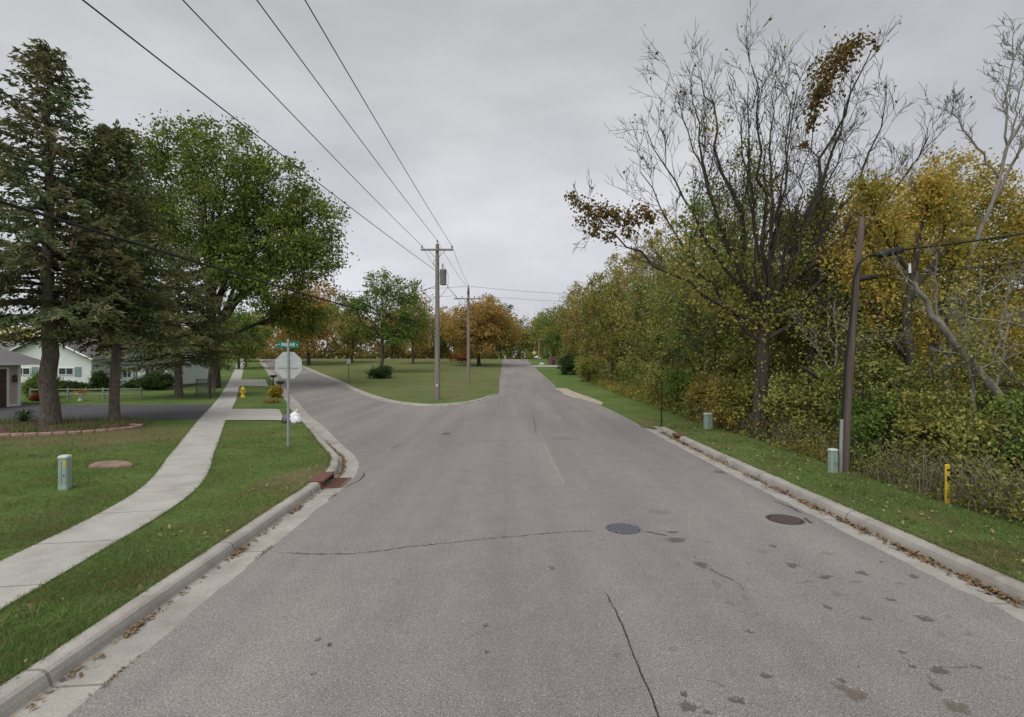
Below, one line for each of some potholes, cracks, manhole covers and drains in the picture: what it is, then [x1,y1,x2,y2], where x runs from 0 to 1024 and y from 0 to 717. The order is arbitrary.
manhole cover [605,523,642,535]
manhole cover [765,514,806,525]
crack [606,592,660,717]
crack [269,530,606,555]
crack [692,541,746,591]
drain grate [306,471,351,489]
